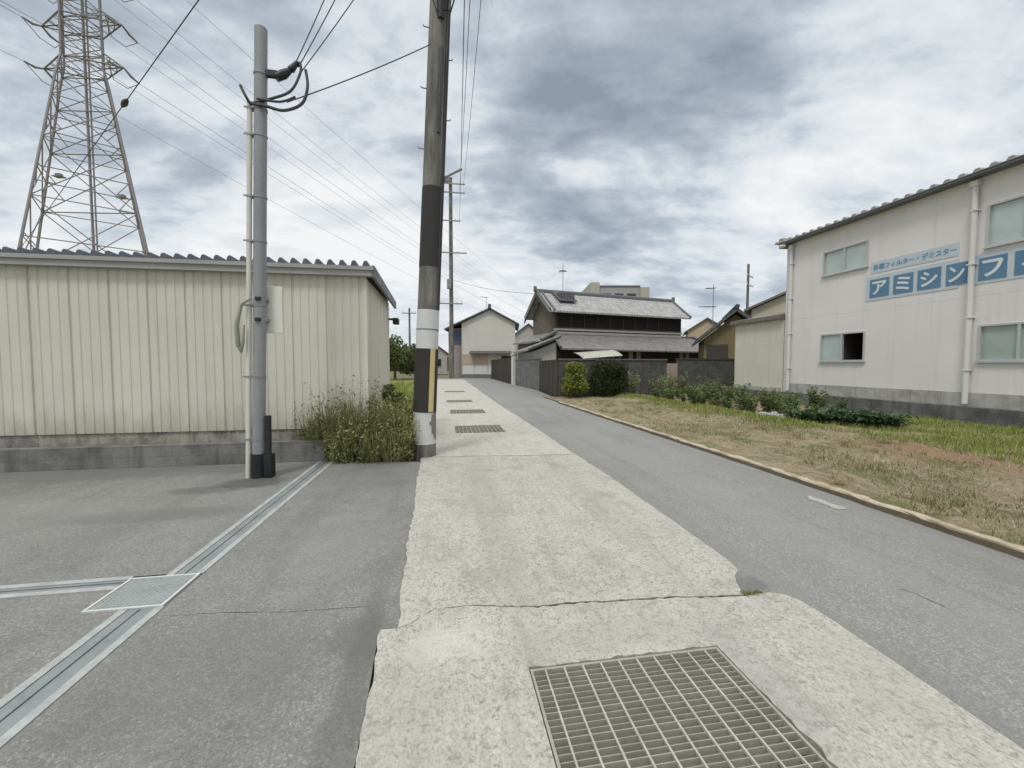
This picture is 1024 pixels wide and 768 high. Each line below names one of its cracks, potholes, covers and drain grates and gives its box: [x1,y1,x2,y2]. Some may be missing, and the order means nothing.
drain grate [455,425,505,433]
drain grate [530,647,833,768]
crack [484,596,735,608]
